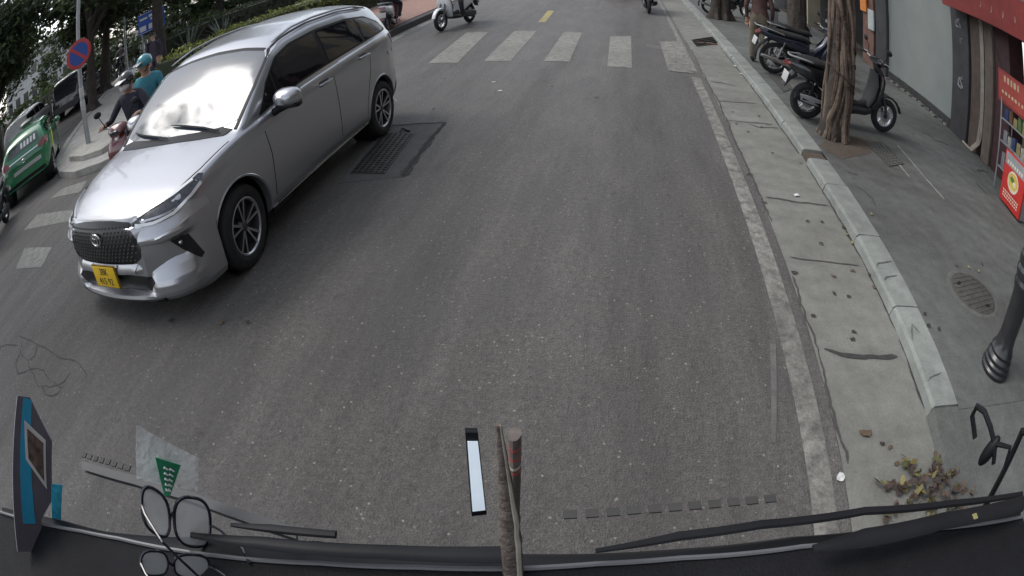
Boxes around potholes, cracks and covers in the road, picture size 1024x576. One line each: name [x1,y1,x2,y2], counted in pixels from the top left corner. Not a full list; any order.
manhole cover [947,270,999,319]
crack [0,336,87,396]
drain grate [866,141,904,166]
drain grate [350,133,414,174]
drain grate [692,37,717,47]
